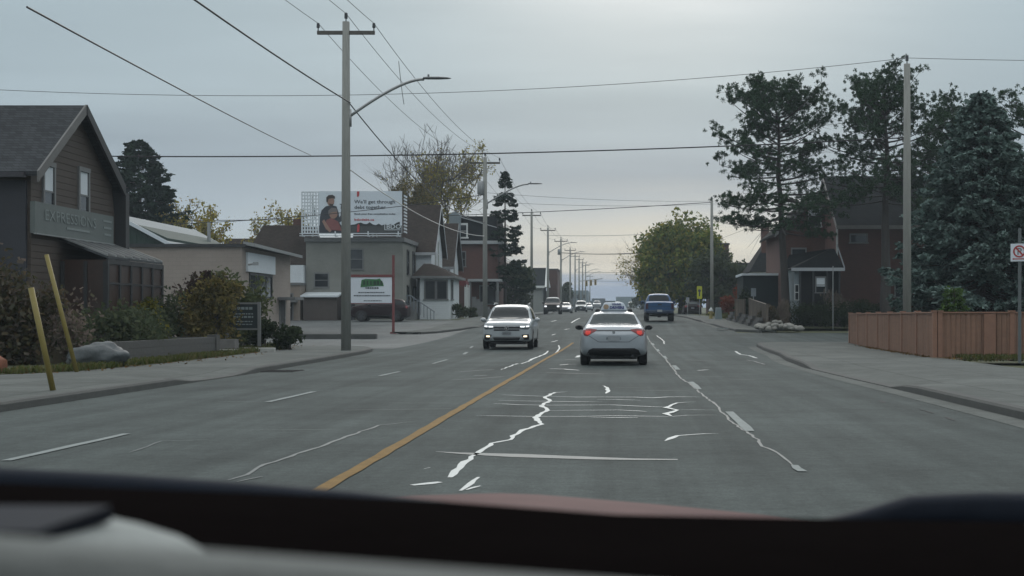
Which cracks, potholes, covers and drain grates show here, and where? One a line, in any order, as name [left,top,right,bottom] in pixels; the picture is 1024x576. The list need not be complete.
crack [459,477,480,491]
crack [411,433,715,485]
